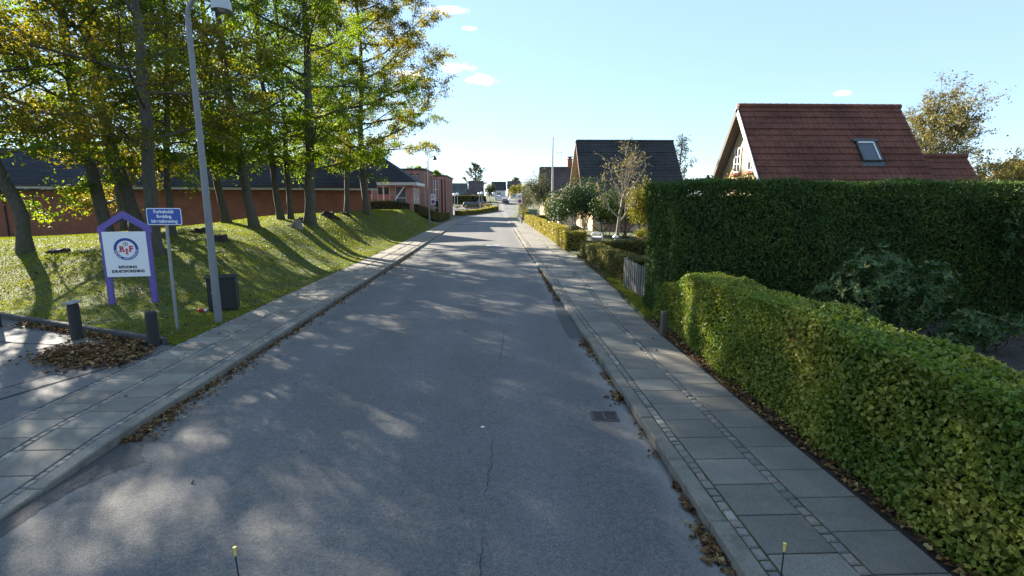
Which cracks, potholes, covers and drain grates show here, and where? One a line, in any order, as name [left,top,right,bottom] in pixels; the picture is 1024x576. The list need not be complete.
drain grate [589,411,620,422]
crack [484,436,495,494]
